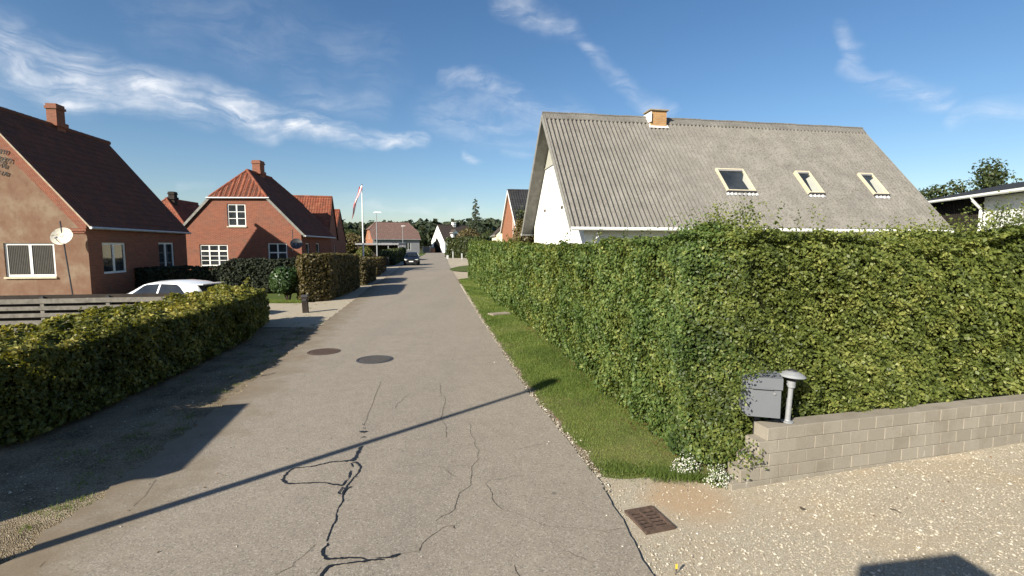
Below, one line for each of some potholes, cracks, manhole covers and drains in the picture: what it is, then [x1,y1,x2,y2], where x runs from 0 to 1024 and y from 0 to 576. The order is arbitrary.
manhole cover [356,355,394,364]
crack [403,425,619,554]
drain grate [624,505,676,535]
